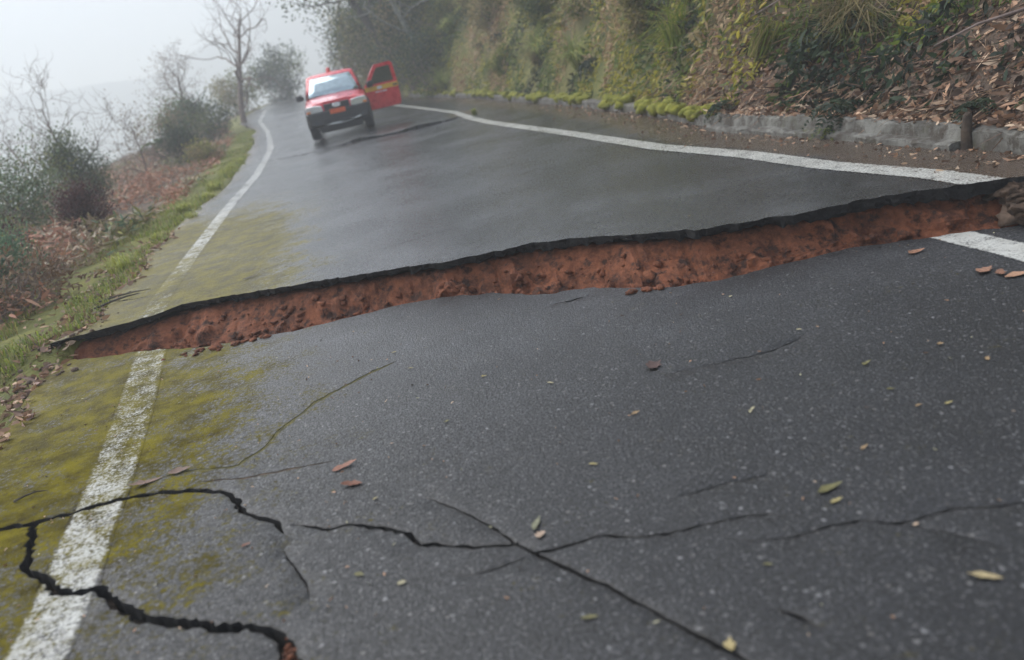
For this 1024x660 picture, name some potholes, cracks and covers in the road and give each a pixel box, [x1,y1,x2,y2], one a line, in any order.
crack [0,176,1024,660]
